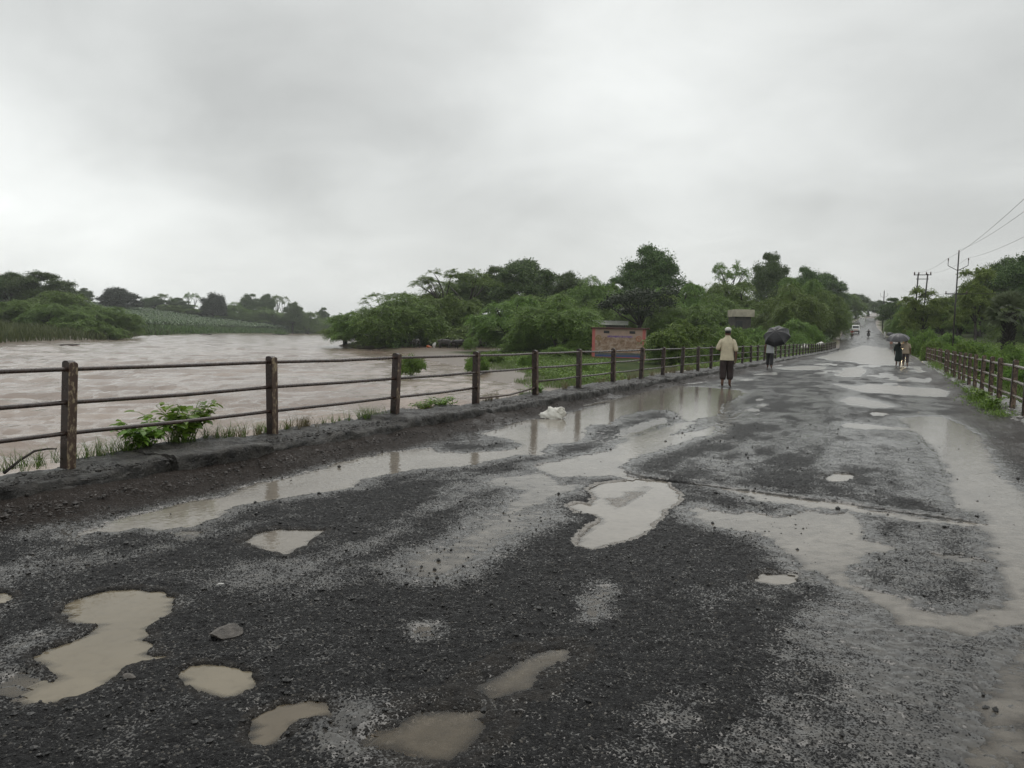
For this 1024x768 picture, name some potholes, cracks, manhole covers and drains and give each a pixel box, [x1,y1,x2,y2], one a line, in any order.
pothole [345,684,528,768]
pothole [232,691,341,753]
pothole [232,525,332,556]
crack [621,471,988,525]
pothole [817,470,860,483]
pothole [168,657,266,701]
pothole [564,478,685,550]
pothole [745,568,807,587]
pothole [10,583,189,708]
pothole [443,635,601,717]
